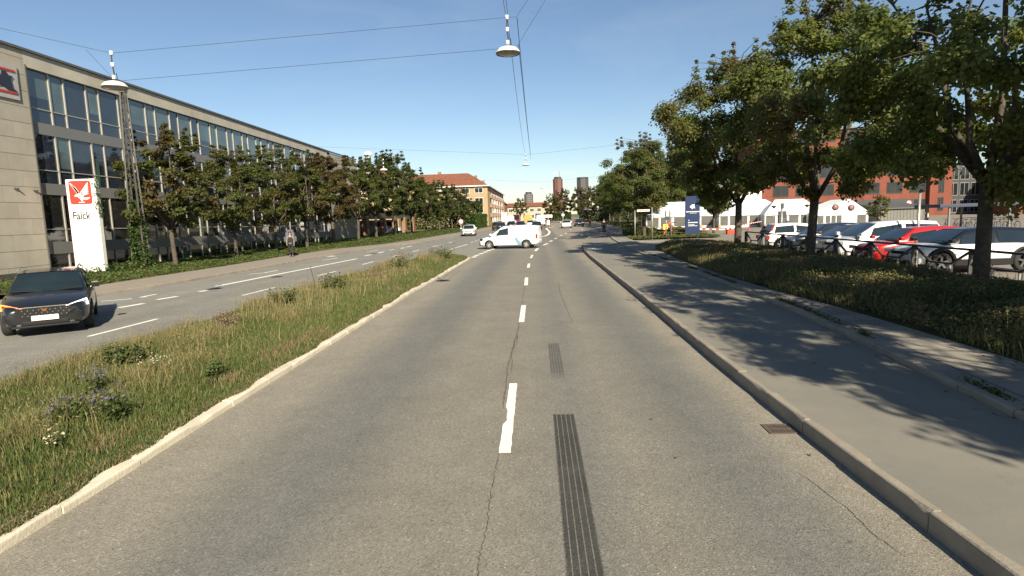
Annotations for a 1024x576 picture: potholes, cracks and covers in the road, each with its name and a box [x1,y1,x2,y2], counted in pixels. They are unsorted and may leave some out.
crack [503,323,520,408]
drain grate [760,423,801,434]
crack [477,459,498,576]
crack [800,474,906,557]
